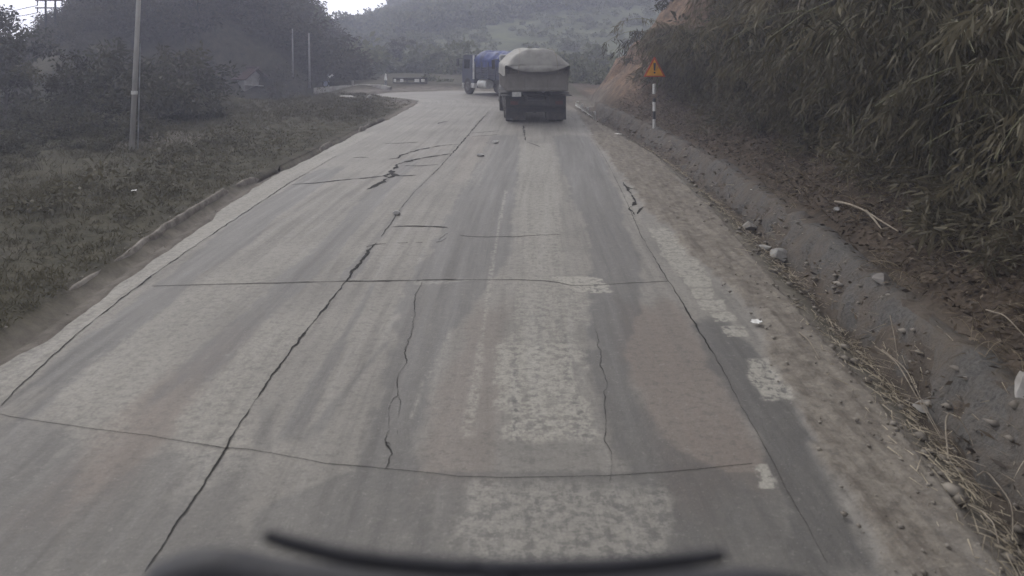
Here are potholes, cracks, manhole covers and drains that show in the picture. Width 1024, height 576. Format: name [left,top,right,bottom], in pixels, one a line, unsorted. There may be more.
crack [292,142,454,189]
crack [595,330,612,478]
crack [384,284,422,470]
crack [367,225,560,247]
